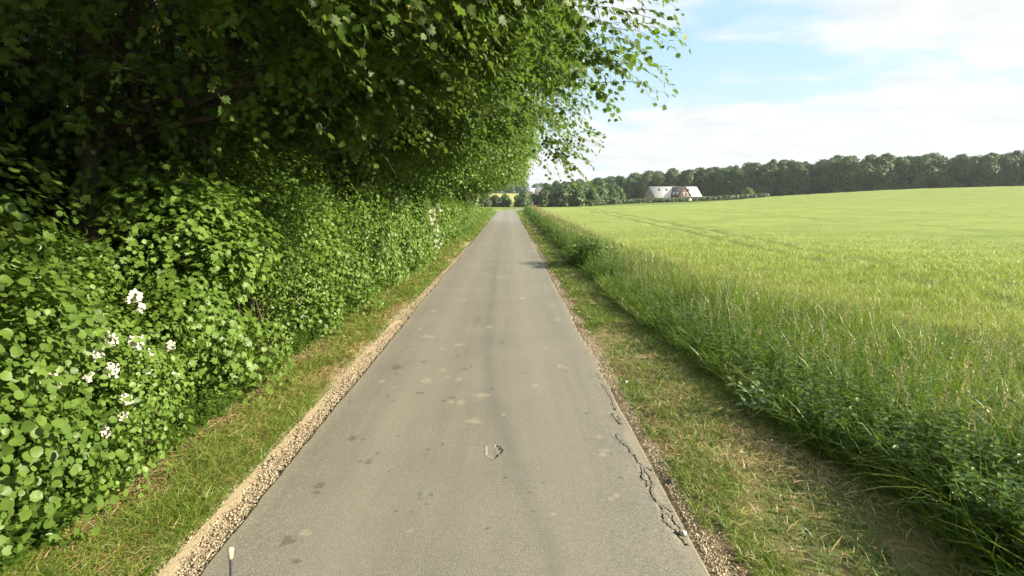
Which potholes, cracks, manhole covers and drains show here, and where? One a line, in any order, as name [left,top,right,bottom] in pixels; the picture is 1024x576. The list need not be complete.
pothole [484,444,505,461]
crack [594,373,687,546]
